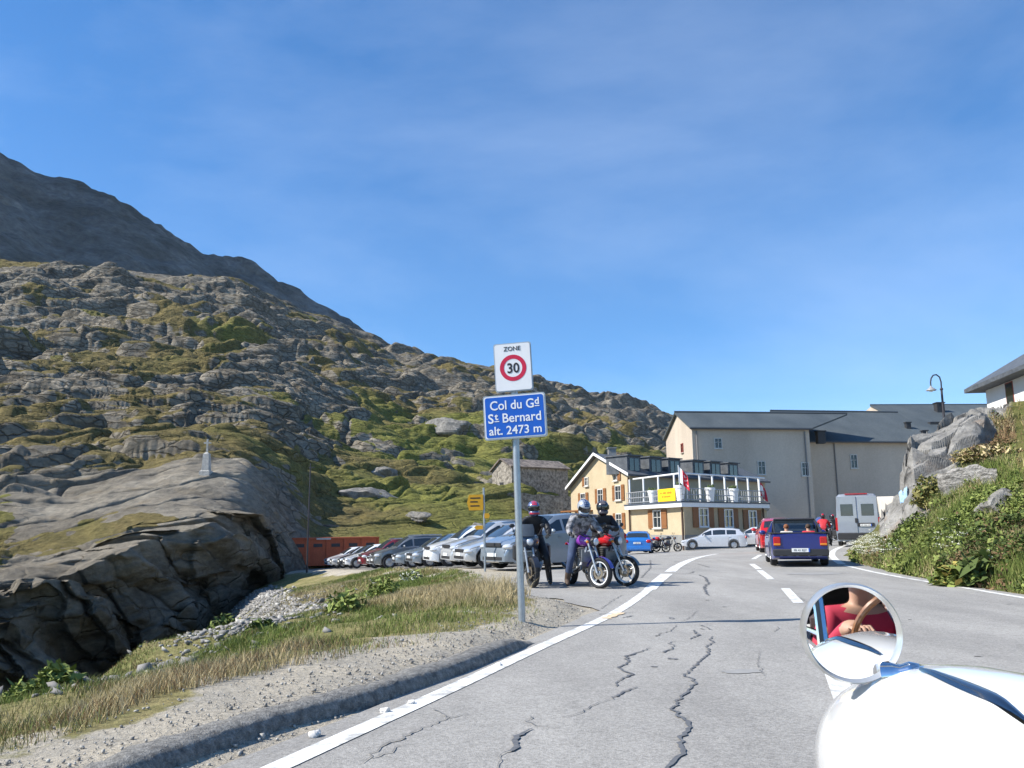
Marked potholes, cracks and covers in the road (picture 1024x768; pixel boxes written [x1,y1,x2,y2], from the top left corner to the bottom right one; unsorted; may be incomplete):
crack [570,613,710,716]
